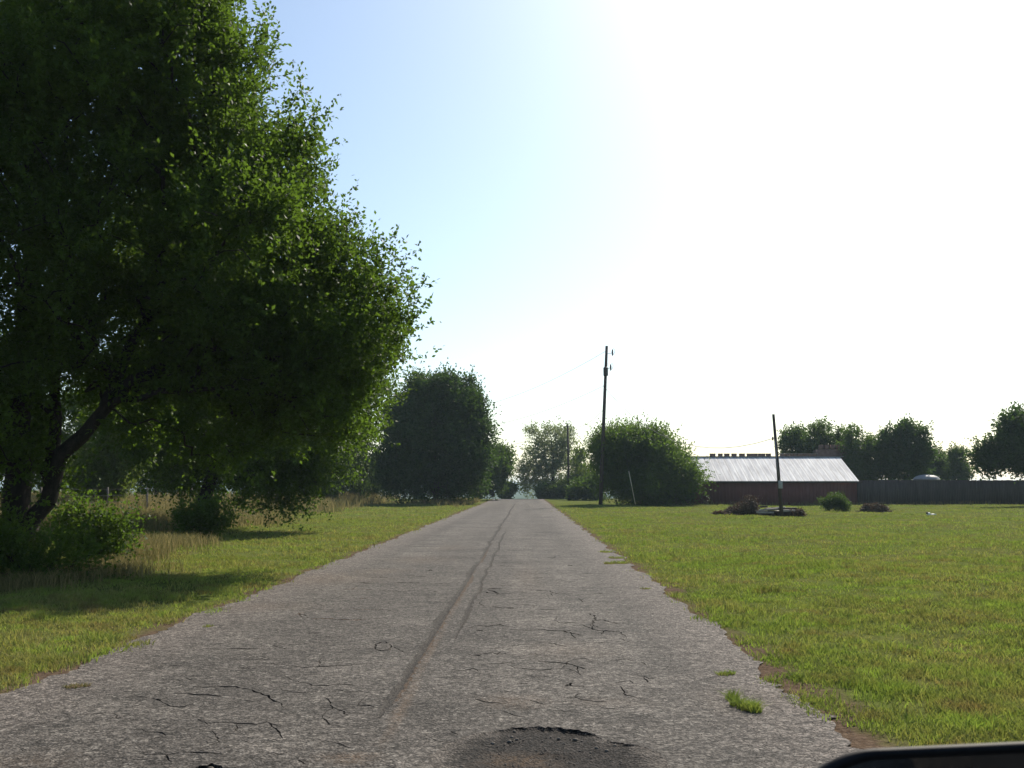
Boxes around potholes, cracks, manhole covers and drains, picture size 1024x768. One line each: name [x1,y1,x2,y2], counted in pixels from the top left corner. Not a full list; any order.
pothole [427,726,671,768]
crack [96,504,650,764]
